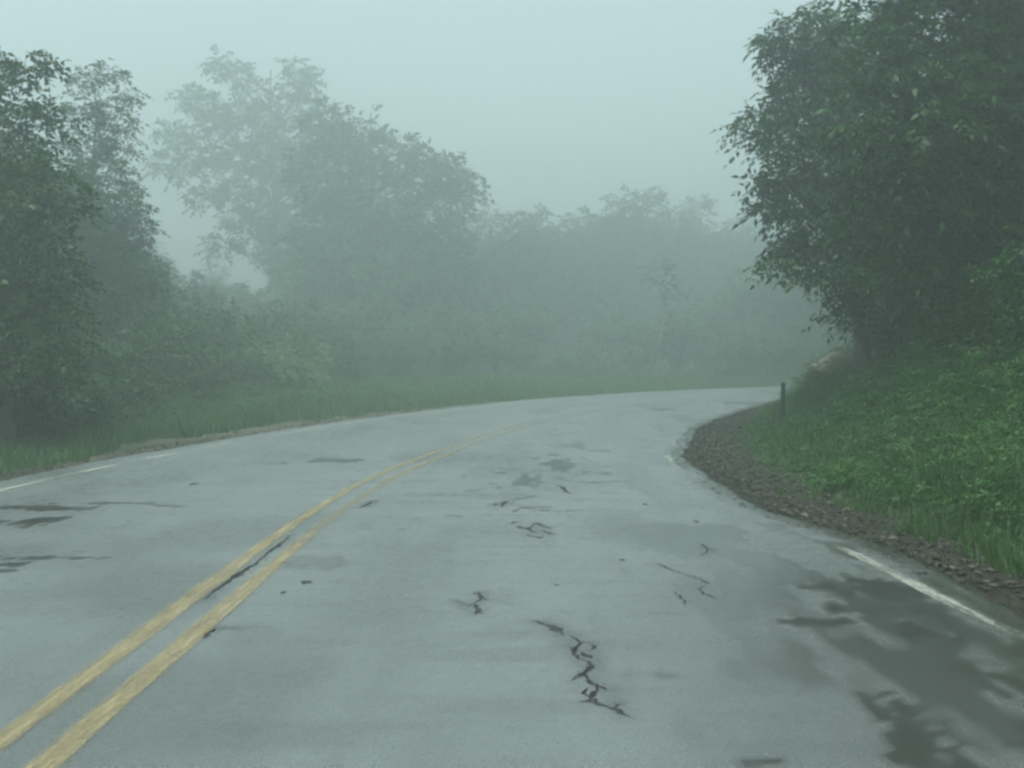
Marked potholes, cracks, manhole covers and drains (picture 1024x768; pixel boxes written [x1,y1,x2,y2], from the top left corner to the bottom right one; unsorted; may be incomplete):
crack [493,485,572,538]
crack [534,621,631,718]
crack [455,592,488,614]
crack [658,563,719,605]
